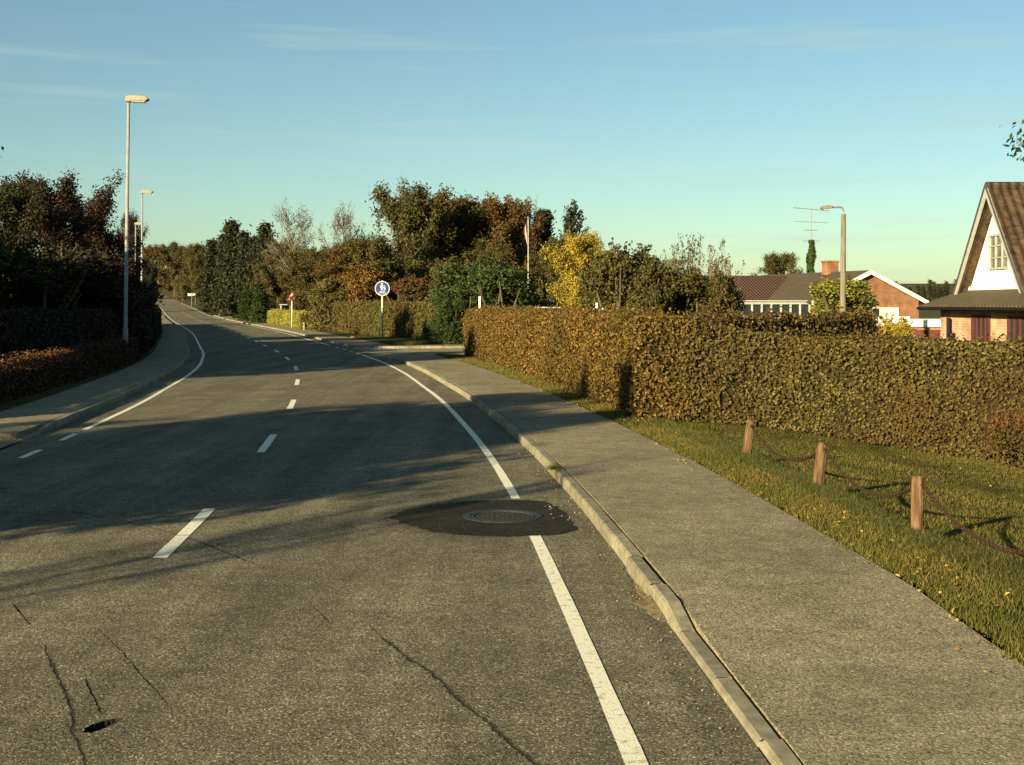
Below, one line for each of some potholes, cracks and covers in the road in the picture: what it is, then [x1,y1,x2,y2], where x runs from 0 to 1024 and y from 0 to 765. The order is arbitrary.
manhole cover [463,509,542,523]
pothole [82,718,122,733]
crack [369,625,541,765]
crack [44,627,173,765]
crack [12,603,33,627]
